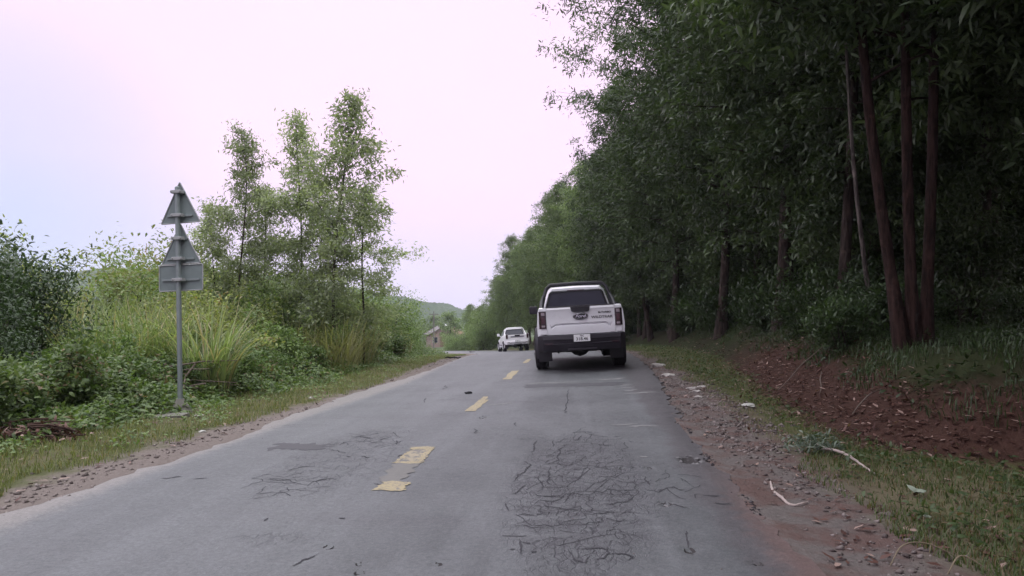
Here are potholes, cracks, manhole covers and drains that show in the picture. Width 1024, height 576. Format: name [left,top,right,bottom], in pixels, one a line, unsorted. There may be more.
pothole [676,455,704,464]
crack [242,430,409,499]
crack [502,391,729,563]
